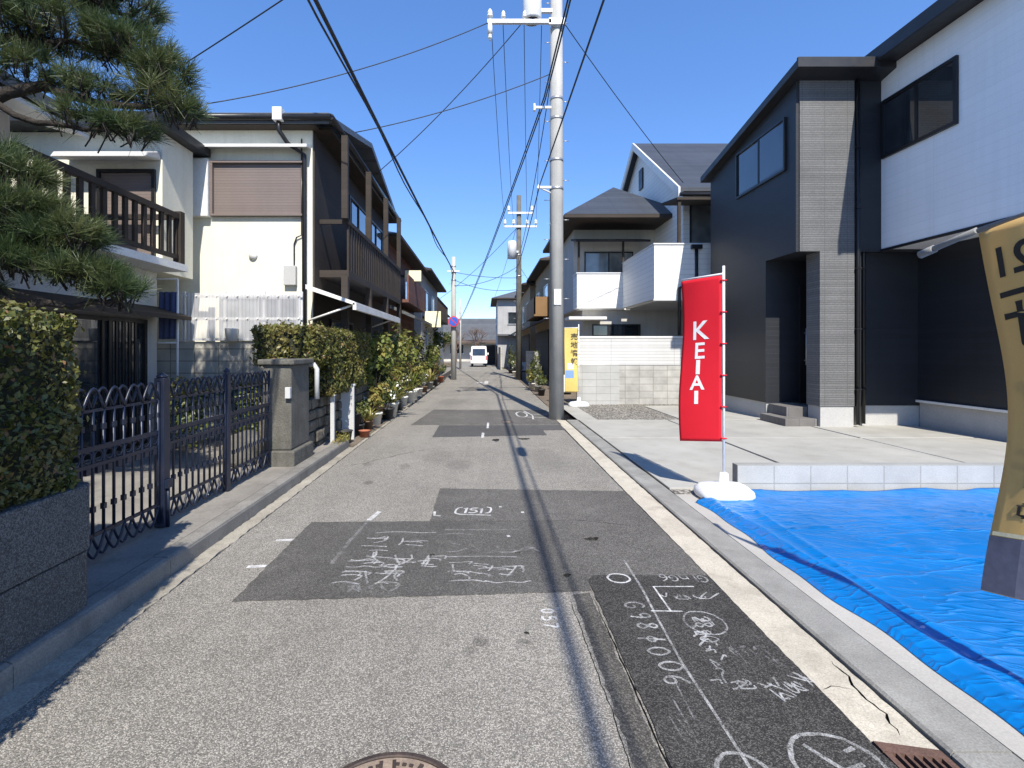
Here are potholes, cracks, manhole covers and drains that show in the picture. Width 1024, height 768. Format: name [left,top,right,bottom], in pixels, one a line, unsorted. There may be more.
drain grate [873,741,960,768]
manhole cover [342,752,449,768]
crack [825,662,900,735]
